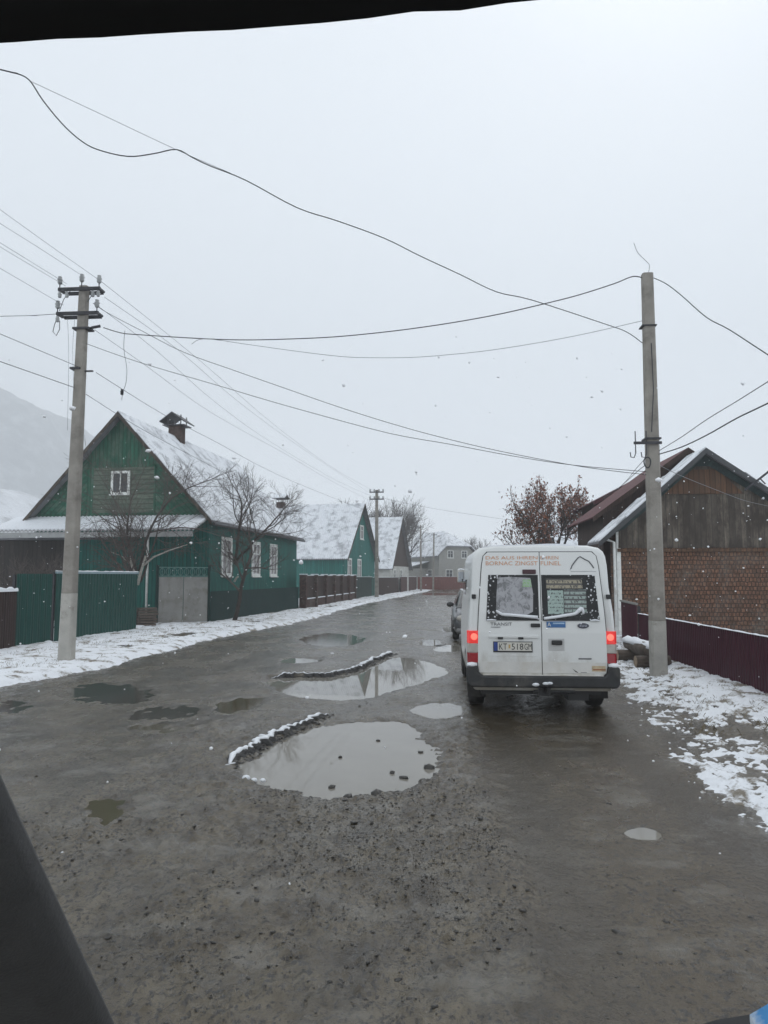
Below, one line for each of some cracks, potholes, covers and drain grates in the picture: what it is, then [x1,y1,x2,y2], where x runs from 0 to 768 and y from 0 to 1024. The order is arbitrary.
pothole [52,682,163,705]
pothole [612,824,667,841]
pothole [293,632,370,647]
pothole [75,793,137,828]
pothole [208,695,270,715]
pothole [215,712,460,803]
pothole [402,700,471,720]
pothole [256,651,454,701]
pothole [0,697,39,716]
pothole [117,703,219,724]
